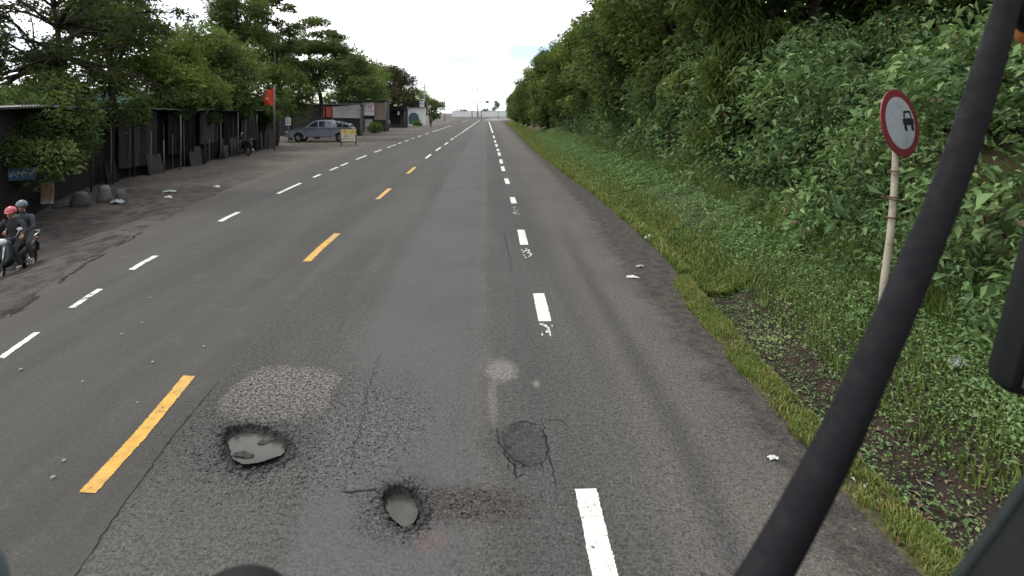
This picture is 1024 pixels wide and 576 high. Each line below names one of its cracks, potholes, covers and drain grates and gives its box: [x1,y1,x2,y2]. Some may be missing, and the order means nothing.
crack [351,354,381,465]
pothole [373,480,434,543]
pothole [208,419,310,480]
